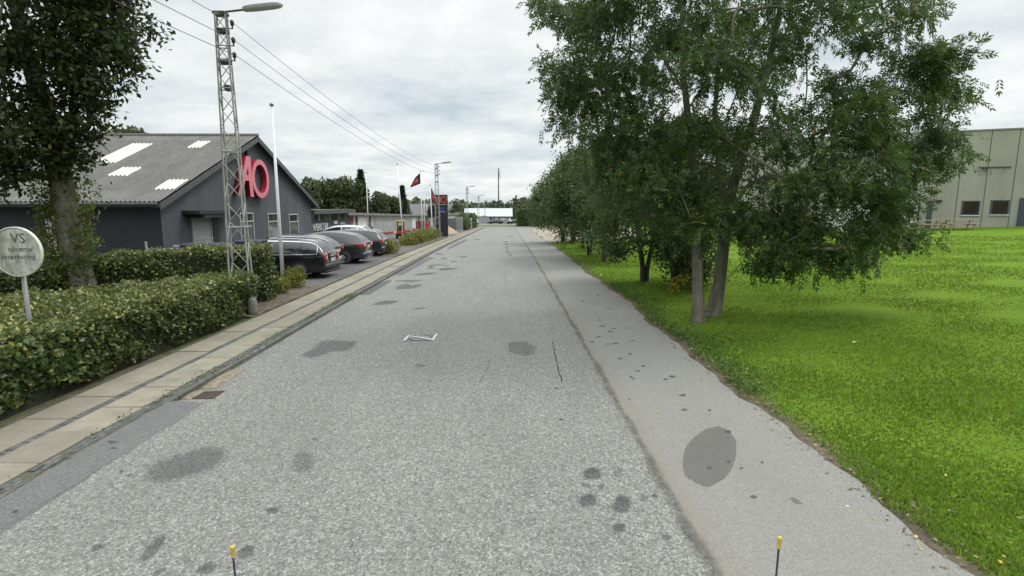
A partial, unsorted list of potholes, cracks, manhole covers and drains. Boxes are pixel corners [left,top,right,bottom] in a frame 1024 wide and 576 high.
drain grate [192,390,224,399]
